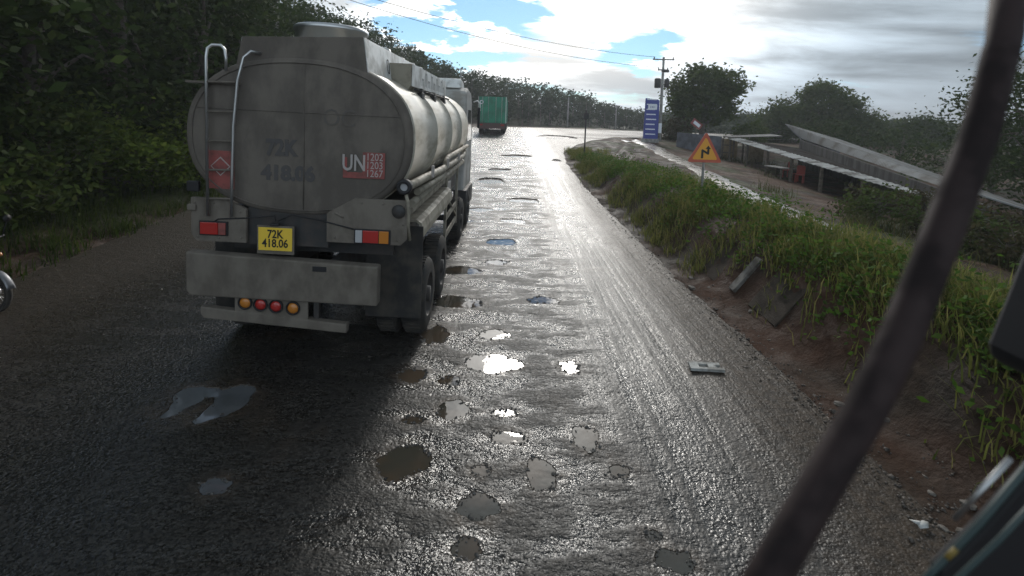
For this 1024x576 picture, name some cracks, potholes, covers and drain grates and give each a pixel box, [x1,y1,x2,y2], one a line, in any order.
pothole [195,474,234,498]
pothole [158,384,257,425]
pothole [570,424,602,454]
pothole [435,399,473,421]
pothole [488,430,530,445]
pothole [450,531,483,562]
pothole [483,238,518,246]
pothole [521,454,559,493]
pothole [464,353,525,375]
pothole [433,295,484,308]
pothole [557,359,581,373]
pothole [653,545,698,576]
